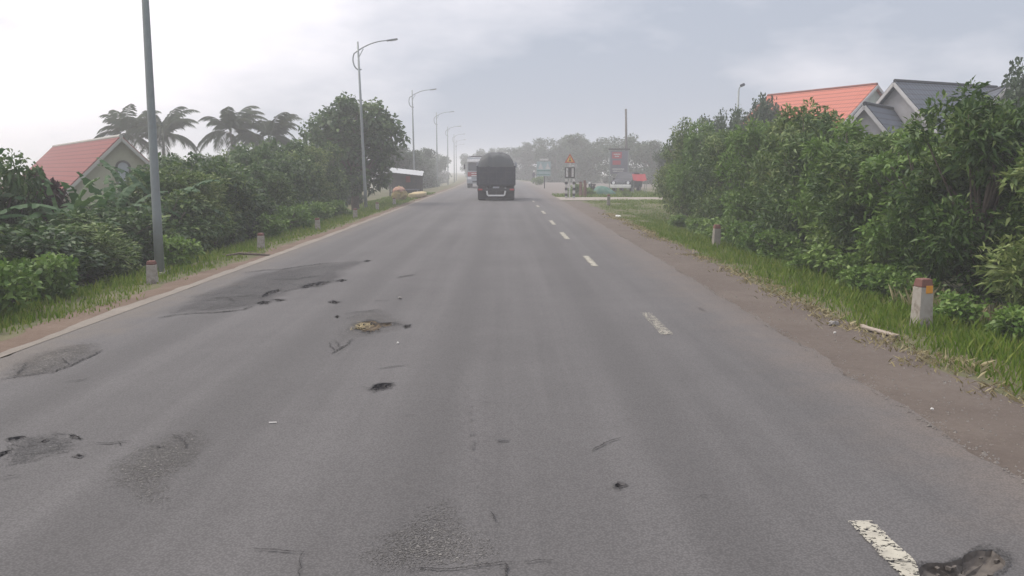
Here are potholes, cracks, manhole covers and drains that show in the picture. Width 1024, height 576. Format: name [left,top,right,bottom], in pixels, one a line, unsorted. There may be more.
pothole [913,543,1012,576]
pothole [347,319,397,333]
crack [408,561,508,576]
pothole [368,381,395,392]
crack [256,548,304,576]
